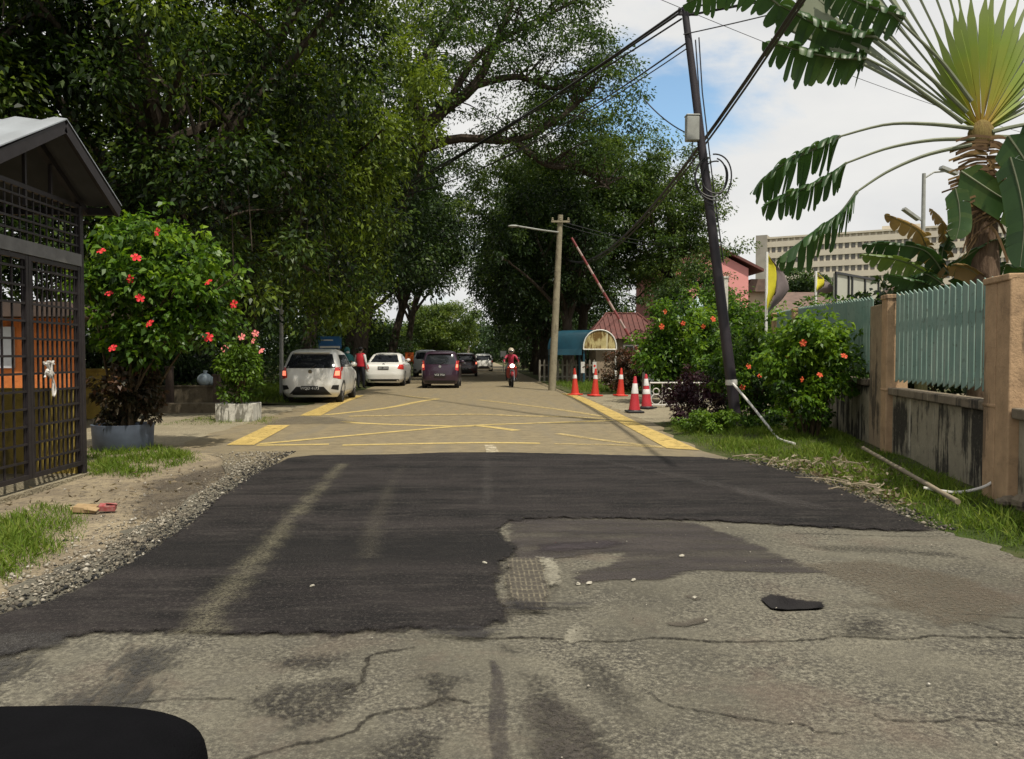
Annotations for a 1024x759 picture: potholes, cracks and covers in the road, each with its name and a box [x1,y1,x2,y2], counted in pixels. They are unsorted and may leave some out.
crack [872,712,1024,725]
crack [340,647,413,691]
crack [245,697,470,759]
crack [642,688,846,733]
pothole [761,594,824,611]
